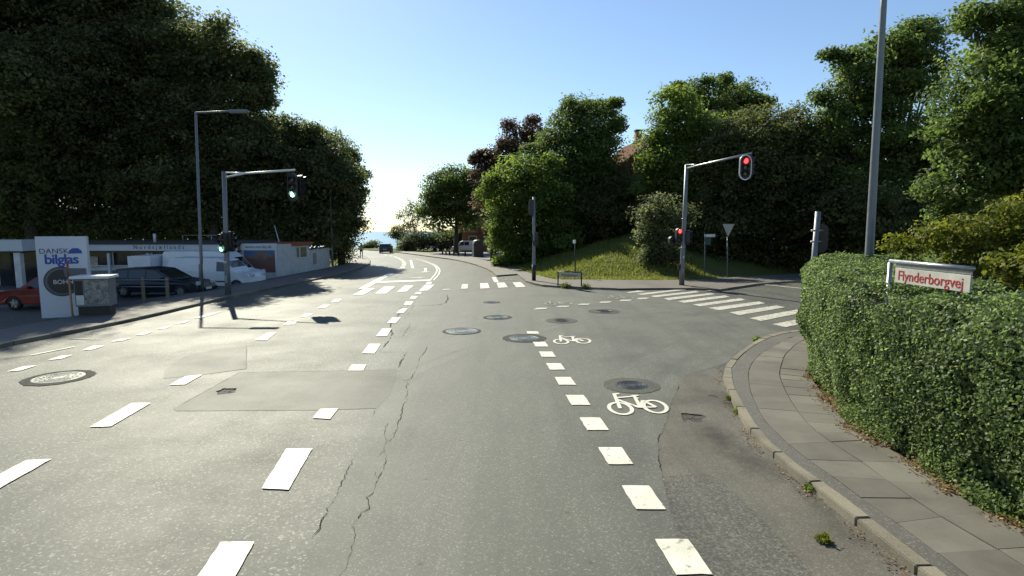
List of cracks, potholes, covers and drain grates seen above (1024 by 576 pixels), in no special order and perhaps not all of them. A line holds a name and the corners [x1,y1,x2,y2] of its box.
manhole cover [604,378,661,394]
manhole cover [19,370,97,386]
manhole cover [503,334,546,343]
crack [341,299,448,573]
pothole [681,413,706,422]
